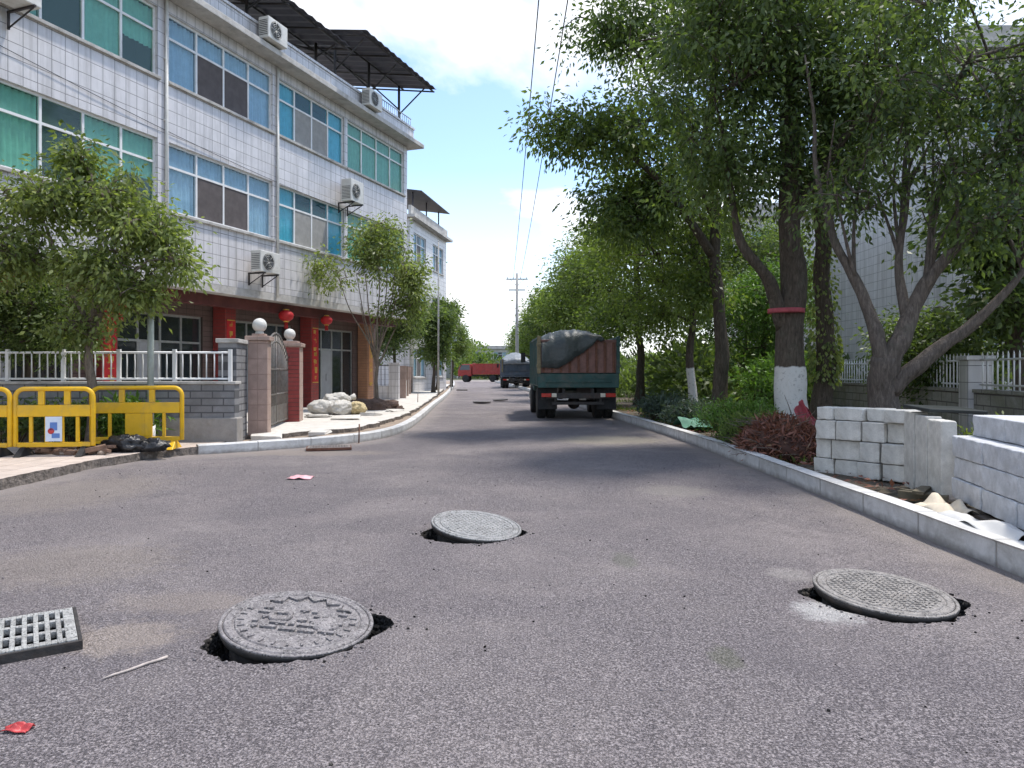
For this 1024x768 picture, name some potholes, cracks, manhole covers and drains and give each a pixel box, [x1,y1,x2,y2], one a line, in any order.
manhole cover [200,591,394,665]
manhole cover [797,569,971,624]
drain grate [0,607,83,665]
manhole cover [420,510,528,544]
